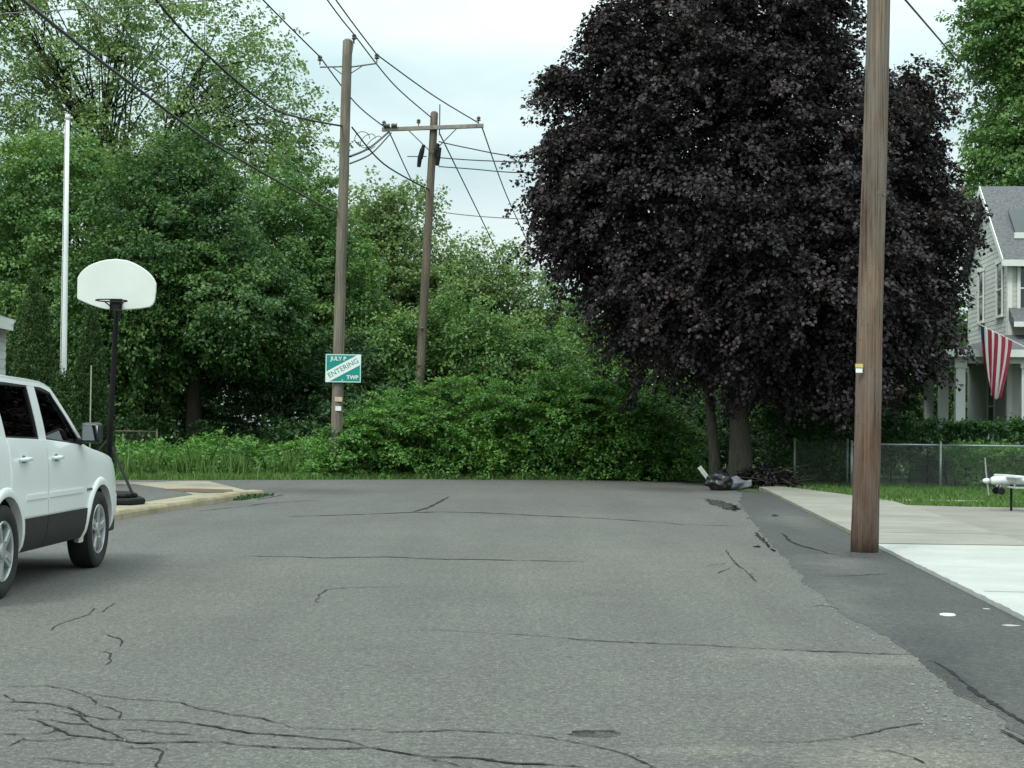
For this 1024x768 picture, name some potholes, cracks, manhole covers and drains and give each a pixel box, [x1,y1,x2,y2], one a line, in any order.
crack [202,495,729,526]
pothole [567,730,621,738]
crack [418,629,906,655]
crack [776,660,1024,745]
crack [0,684,656,768]
crack [707,549,757,582]
pothole [703,498,743,512]
crack [781,533,831,554]
